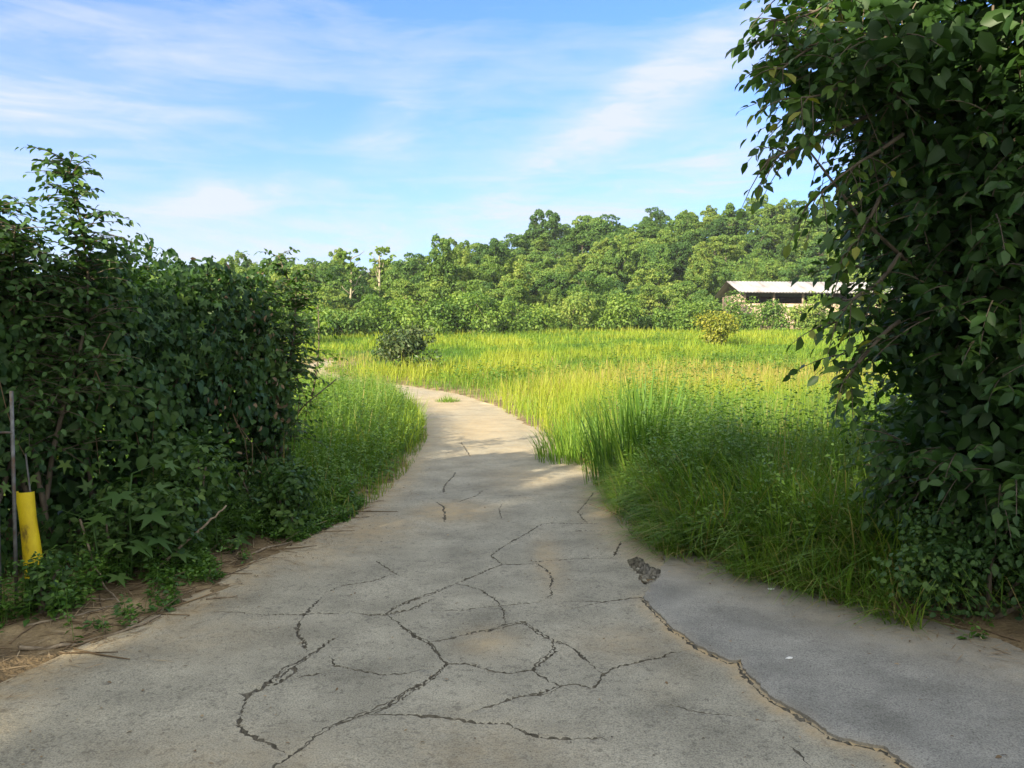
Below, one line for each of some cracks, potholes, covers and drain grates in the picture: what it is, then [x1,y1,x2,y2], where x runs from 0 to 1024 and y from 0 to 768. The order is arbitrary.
crack [233,493,906,768]
crack [437,442,482,522]
pothole [627,557,661,585]
